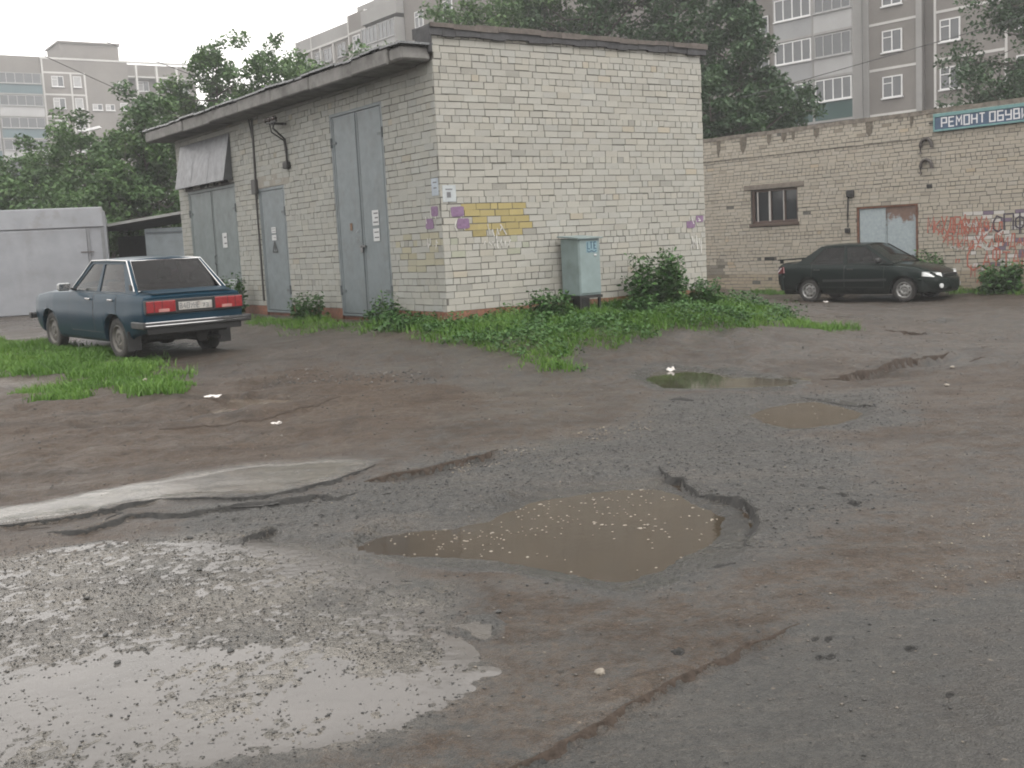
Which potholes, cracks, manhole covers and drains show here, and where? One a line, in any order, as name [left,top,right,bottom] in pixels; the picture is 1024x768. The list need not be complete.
crack [659,465,760,568]
pothole [321,468,767,594]
pothole [627,362,812,393]
crack [0,449,498,545]
pothole [733,396,884,431]
